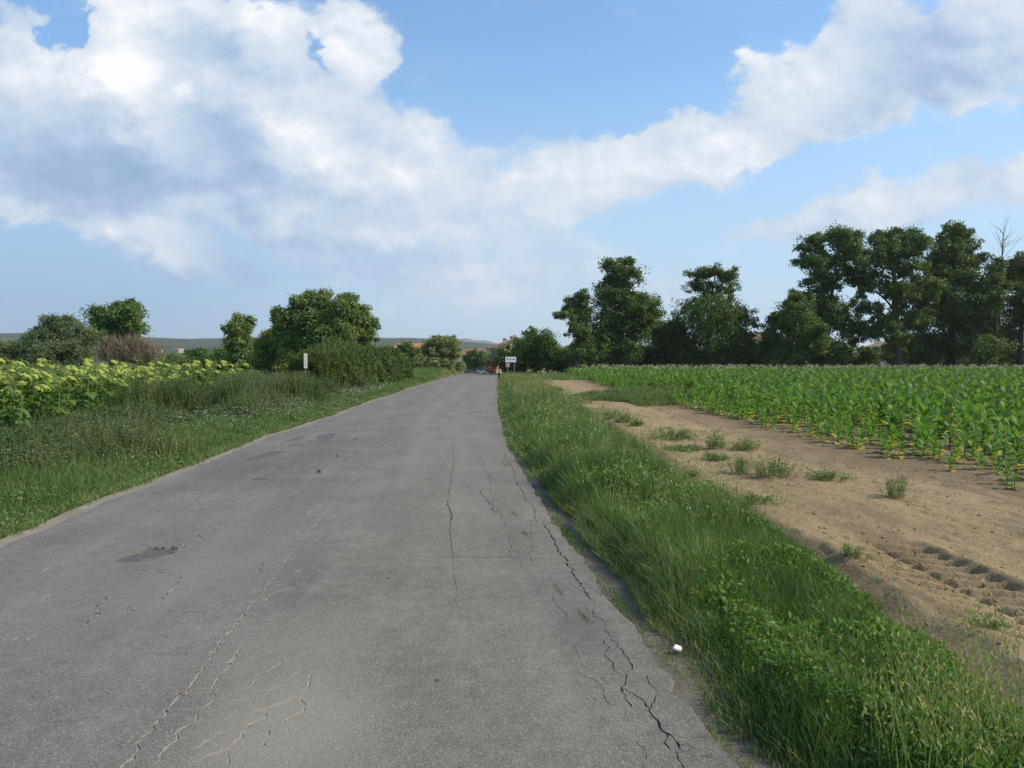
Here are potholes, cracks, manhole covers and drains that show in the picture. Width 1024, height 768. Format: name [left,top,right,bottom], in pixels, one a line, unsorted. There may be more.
pothole [114,546,178,563]
crack [155,648,312,766]
crack [345,433,698,768]
pothole [242,450,283,461]
pothole [315,433,336,443]
